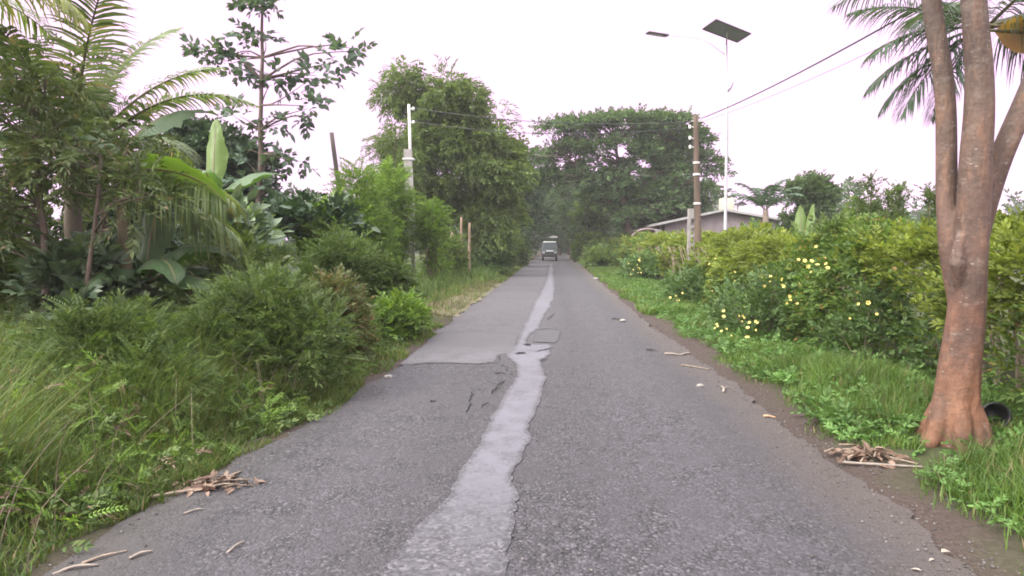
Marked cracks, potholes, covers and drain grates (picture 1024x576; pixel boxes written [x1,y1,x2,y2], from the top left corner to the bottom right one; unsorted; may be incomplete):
crack [465,391,475,414]
